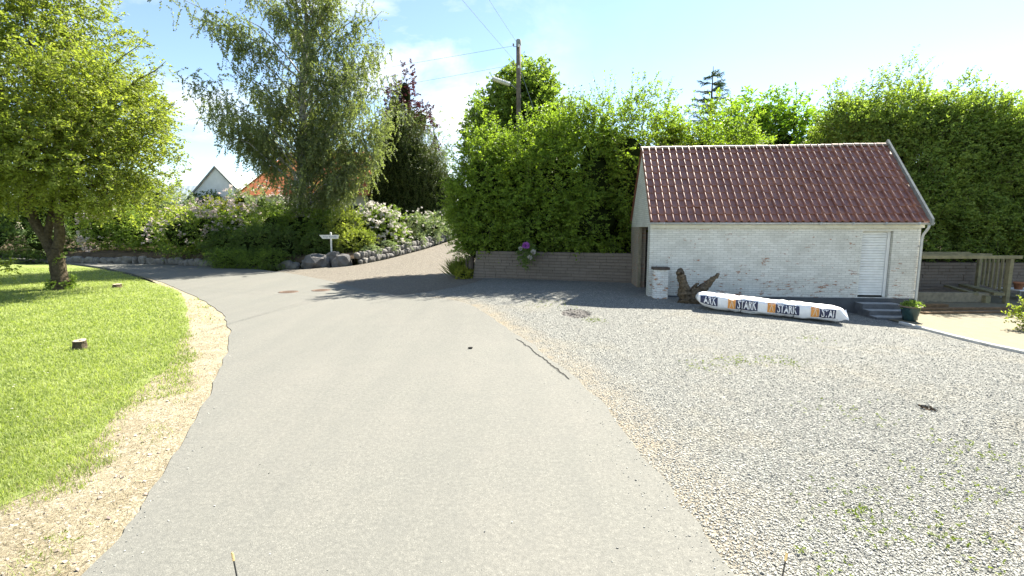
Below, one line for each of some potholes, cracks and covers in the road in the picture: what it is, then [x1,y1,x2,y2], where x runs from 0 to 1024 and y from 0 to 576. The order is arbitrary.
crack [517,339,569,379]
